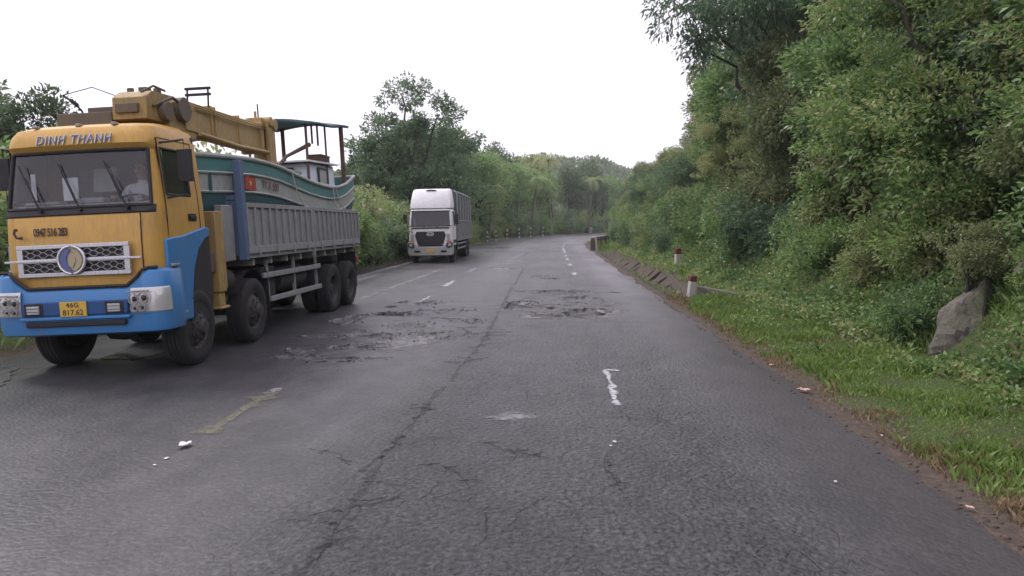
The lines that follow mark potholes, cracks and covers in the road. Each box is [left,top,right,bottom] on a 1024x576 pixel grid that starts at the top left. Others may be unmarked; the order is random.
crack [419,463,484,485]
pothole [513,304,575,316]
pothole [387,321,438,331]
pothole [338,332,398,342]
pothole [431,308,475,316]
pothole [559,307,624,318]
pothole [326,316,362,325]
crack [341,300,486,361]
pothole [410,331,453,341]
pothole [557,294,608,305]
